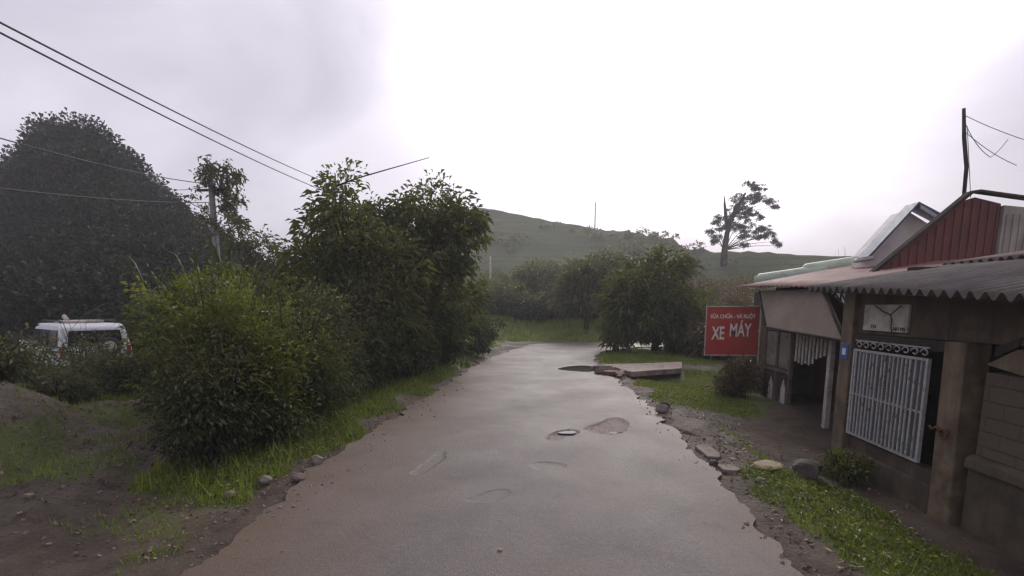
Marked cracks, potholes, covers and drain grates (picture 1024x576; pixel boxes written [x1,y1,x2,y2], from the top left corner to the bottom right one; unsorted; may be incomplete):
pothole [583,417,630,434]
